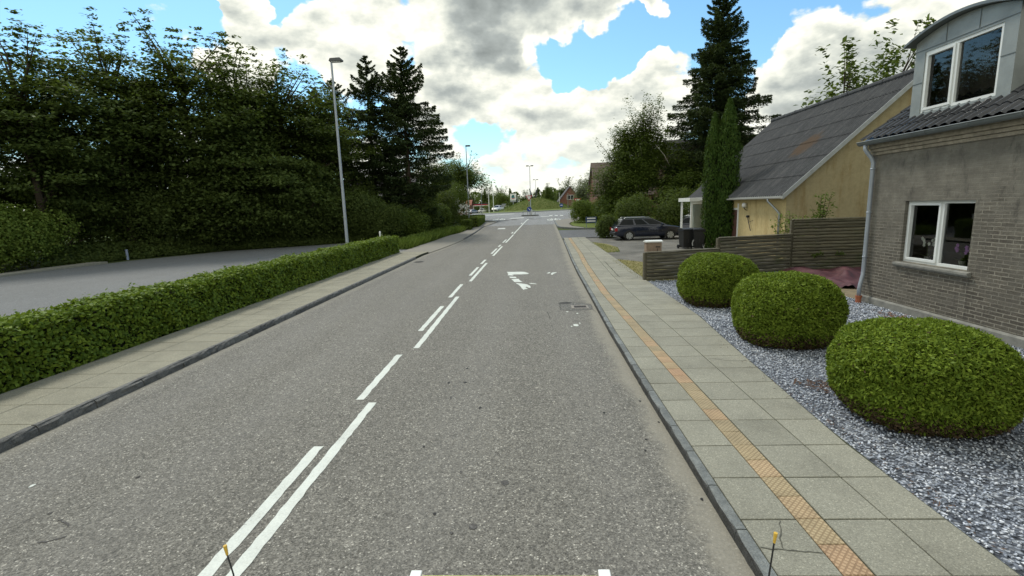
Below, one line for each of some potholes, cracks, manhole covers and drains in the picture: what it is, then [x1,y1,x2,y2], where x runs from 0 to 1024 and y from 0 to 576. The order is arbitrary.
crack [761,519,822,553]
